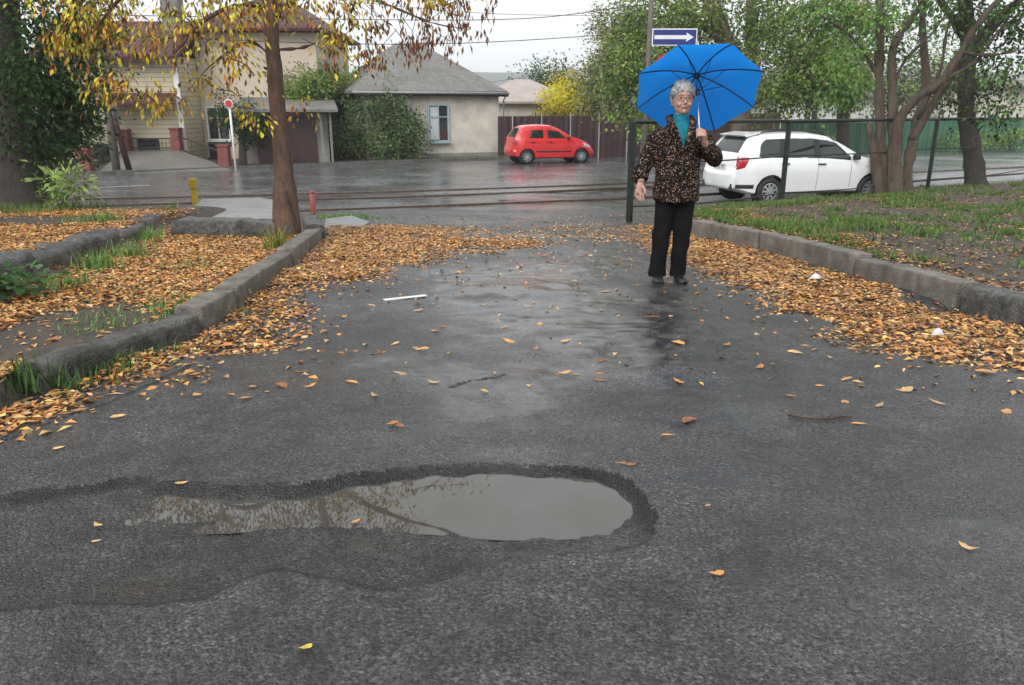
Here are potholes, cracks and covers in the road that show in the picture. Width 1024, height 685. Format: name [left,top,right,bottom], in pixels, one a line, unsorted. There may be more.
crack [448,374,506,388]
pothole [0,462,659,612]
